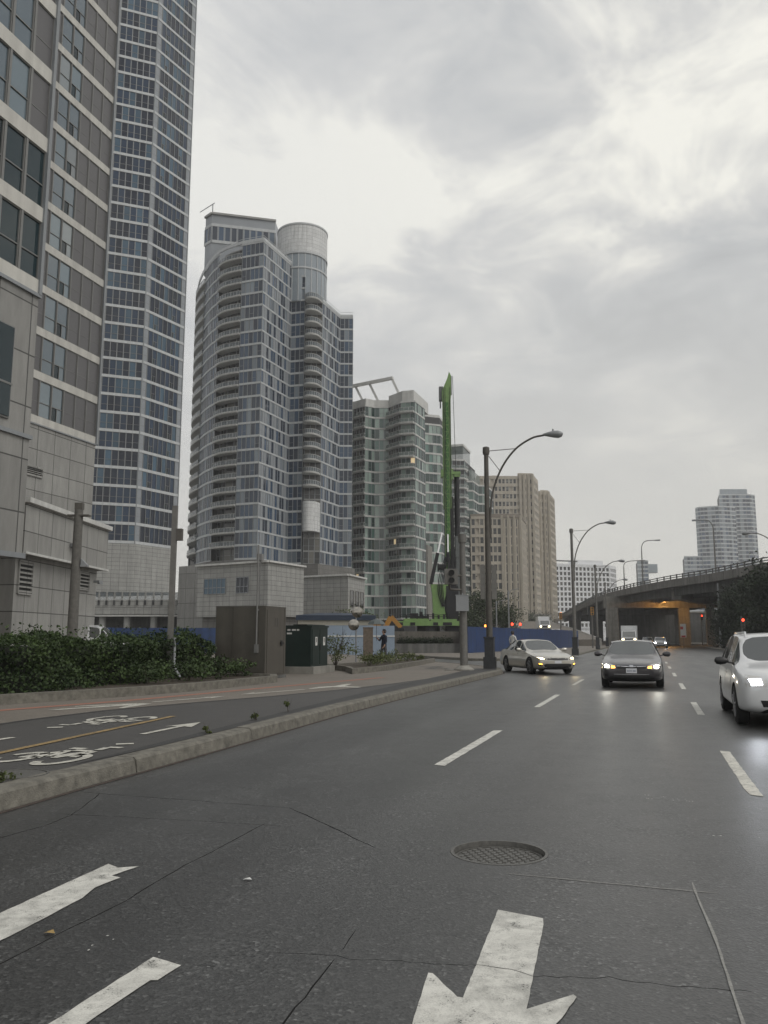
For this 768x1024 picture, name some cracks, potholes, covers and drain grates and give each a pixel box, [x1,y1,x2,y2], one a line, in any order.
manhole cover [451,840,549,866]
crack [282,931,751,1024]
crack [0,792,375,964]
